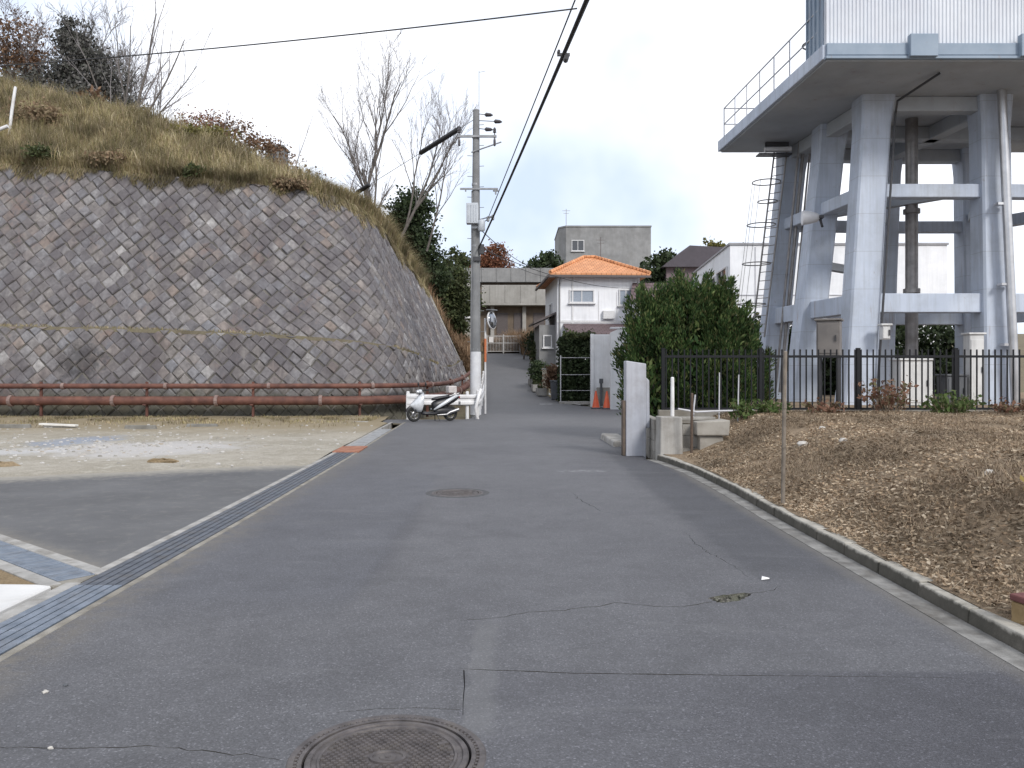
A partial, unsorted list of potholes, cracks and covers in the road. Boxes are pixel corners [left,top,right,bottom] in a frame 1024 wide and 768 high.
drain grate [192,509,257,529]
drain grate [0,631,40,656]
drain grate [314,458,344,466]
manhole cover [285,714,486,768]
pothole [708,593,751,603]
drain grate [144,528,224,553]
crack [469,537,780,620]
drain grate [256,483,302,496]
drain grate [279,473,319,484]
drain grate [0,585,122,633]
drain grate [78,552,181,587]
drain grate [299,465,333,474]
